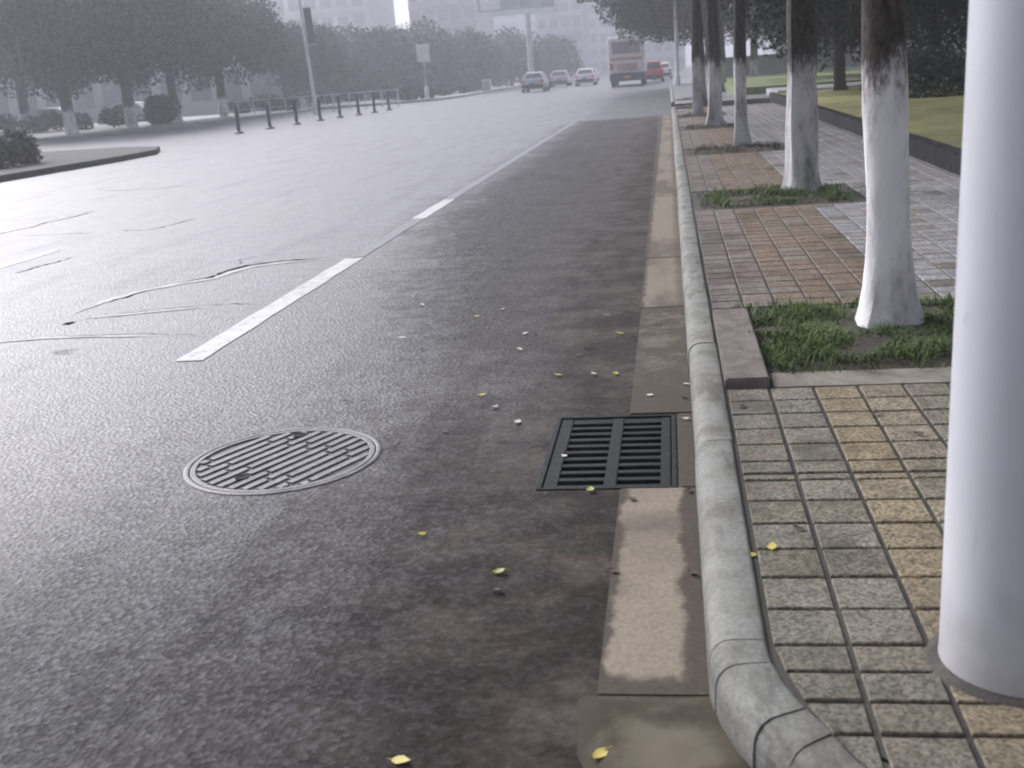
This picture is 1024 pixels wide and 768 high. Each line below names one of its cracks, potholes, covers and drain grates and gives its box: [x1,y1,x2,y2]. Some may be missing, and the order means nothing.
crack [0,211,93,236]
crack [0,254,328,342]
manhole cover [183,427,382,496]
drain grate [535,414,678,491]
